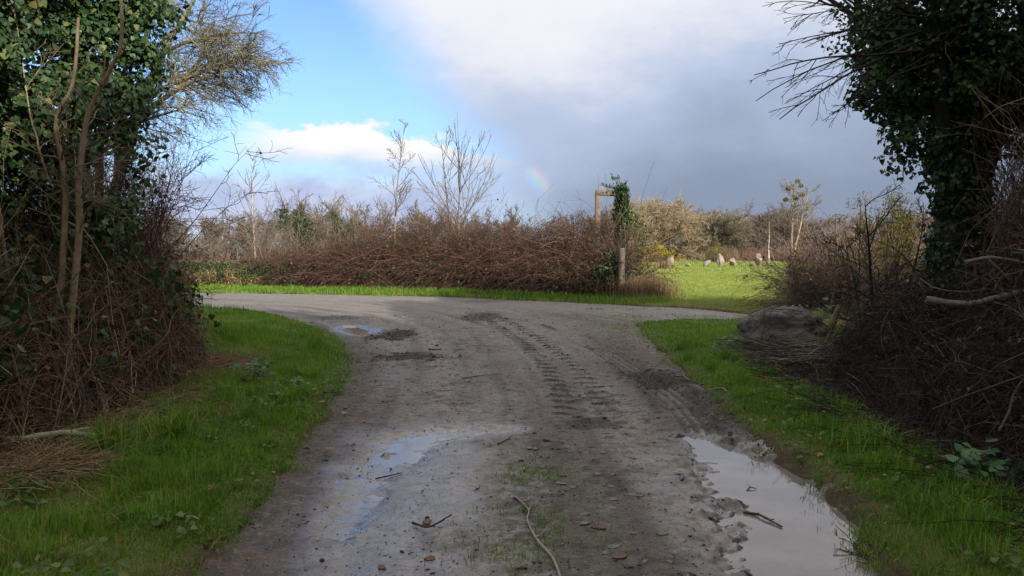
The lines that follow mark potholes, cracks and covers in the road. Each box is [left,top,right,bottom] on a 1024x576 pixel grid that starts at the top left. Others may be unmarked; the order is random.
pothole [643,431,880,576]
pothole [329,325,382,336]
pothole [297,420,534,547]
